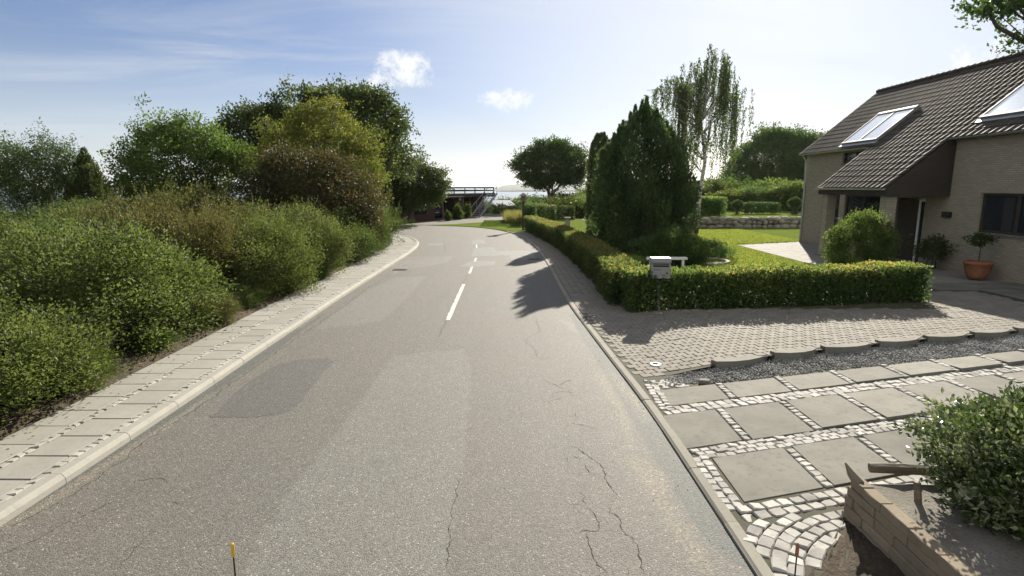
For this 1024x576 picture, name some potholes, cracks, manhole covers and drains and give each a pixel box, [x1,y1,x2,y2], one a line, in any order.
crack [565,446,644,574]
